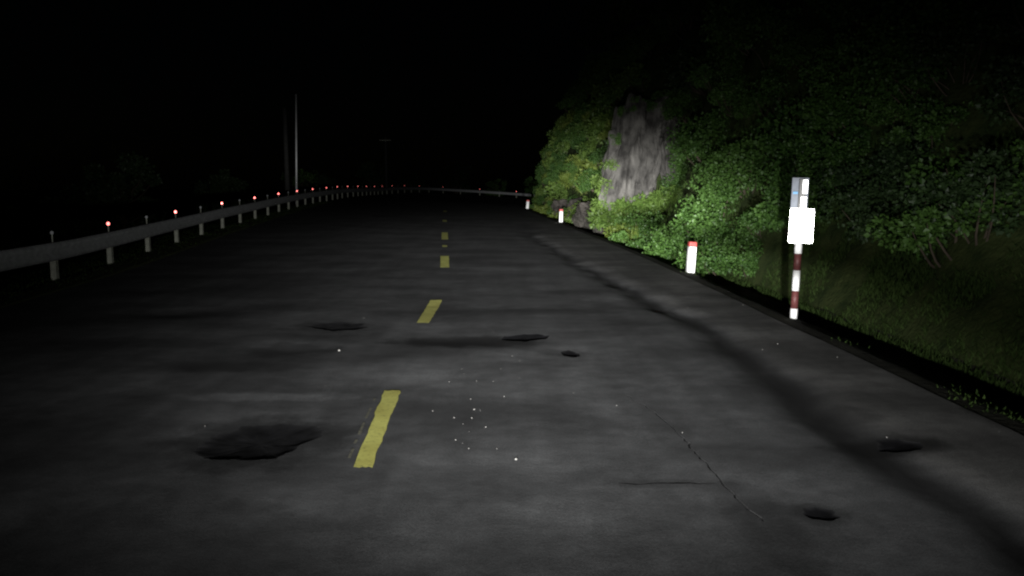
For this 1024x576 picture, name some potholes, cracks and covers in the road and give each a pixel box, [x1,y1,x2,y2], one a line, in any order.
pothole [803,507,841,521]
pothole [305,322,369,331]
pothole [193,424,323,461]
crack [622,394,764,522]
pothole [502,334,549,342]
pothole [876,439,923,453]
